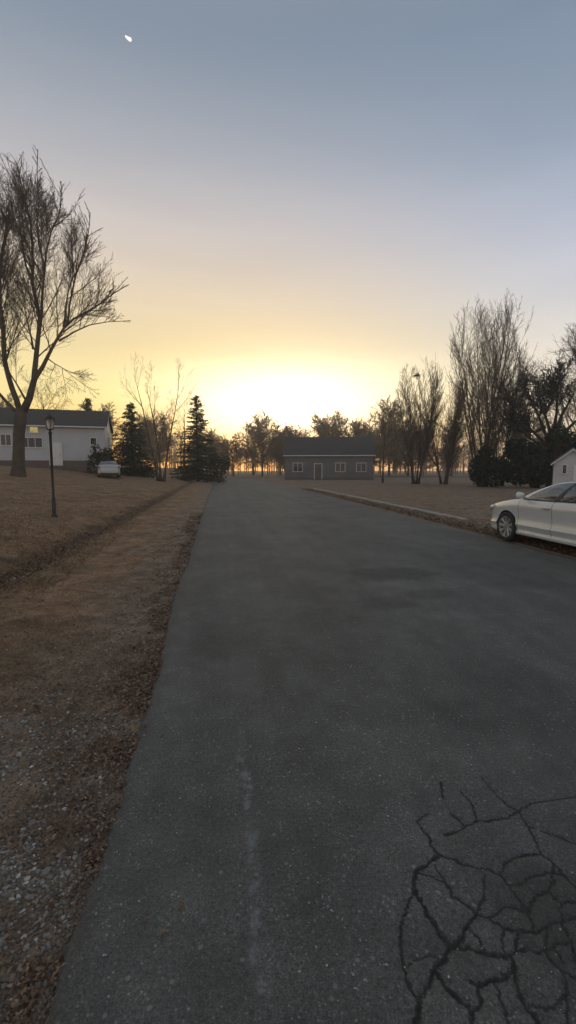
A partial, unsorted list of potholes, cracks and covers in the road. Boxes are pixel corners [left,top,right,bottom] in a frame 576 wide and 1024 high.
crack [398,777,576,1024]
